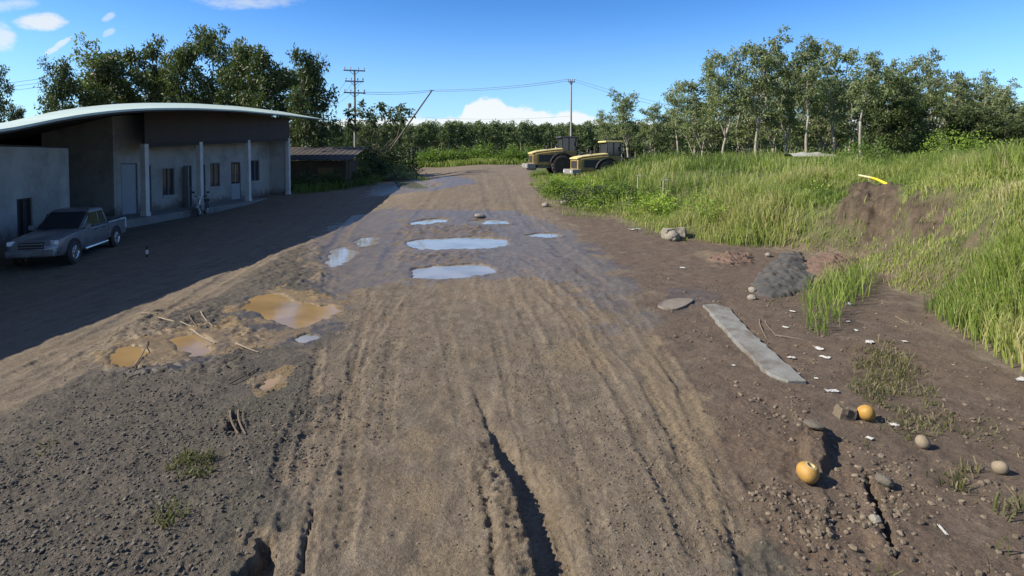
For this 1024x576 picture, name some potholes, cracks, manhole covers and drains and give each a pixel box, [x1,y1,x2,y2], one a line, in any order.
pothole [351,235,386,247]
pothole [230,291,349,330]
pothole [165,331,222,357]
pothole [401,261,508,279]
pothole [400,235,518,250]
pothole [103,341,155,368]
pothole [228,527,283,576]
pothole [252,373,285,391]
crack [863,470,899,558]
pothole [405,217,455,225]
pothole [321,243,362,269]
